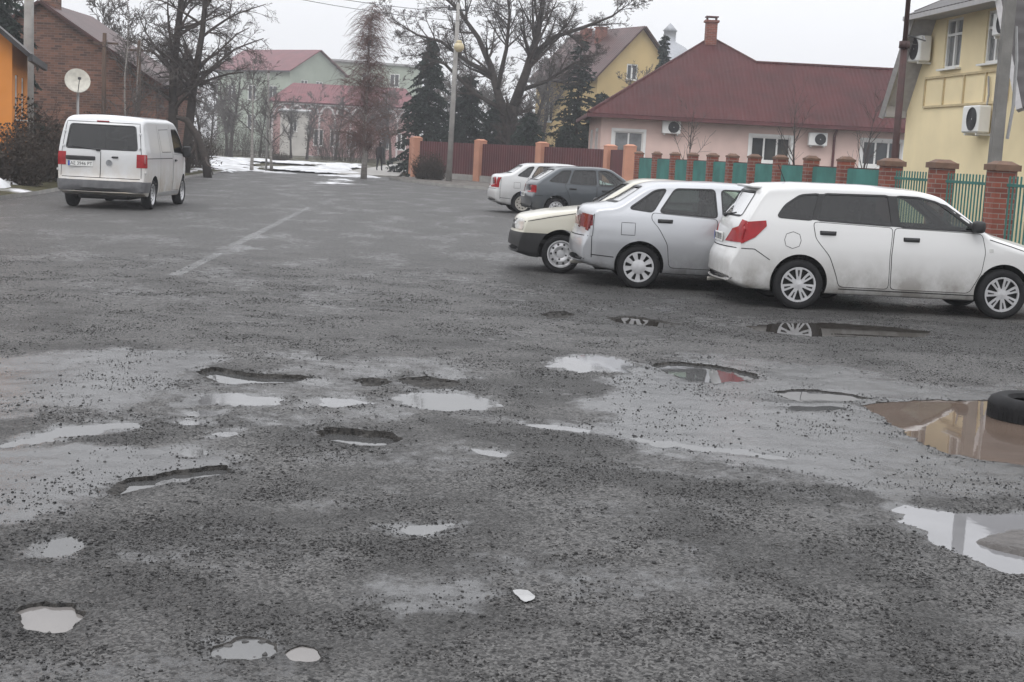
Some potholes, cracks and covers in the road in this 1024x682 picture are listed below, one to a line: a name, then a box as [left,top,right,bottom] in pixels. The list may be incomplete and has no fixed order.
pothole [608,316,681,328]
pothole [651,361,760,384]
pothole [315,427,403,446]
pothole [774,389,868,402]
pothole [15,601,87,633]
pothole [863,399,1024,465]
pothole [284,645,321,662]
pothole [210,636,278,660]
pothole [106,465,232,495]
pothole [196,367,313,384]
